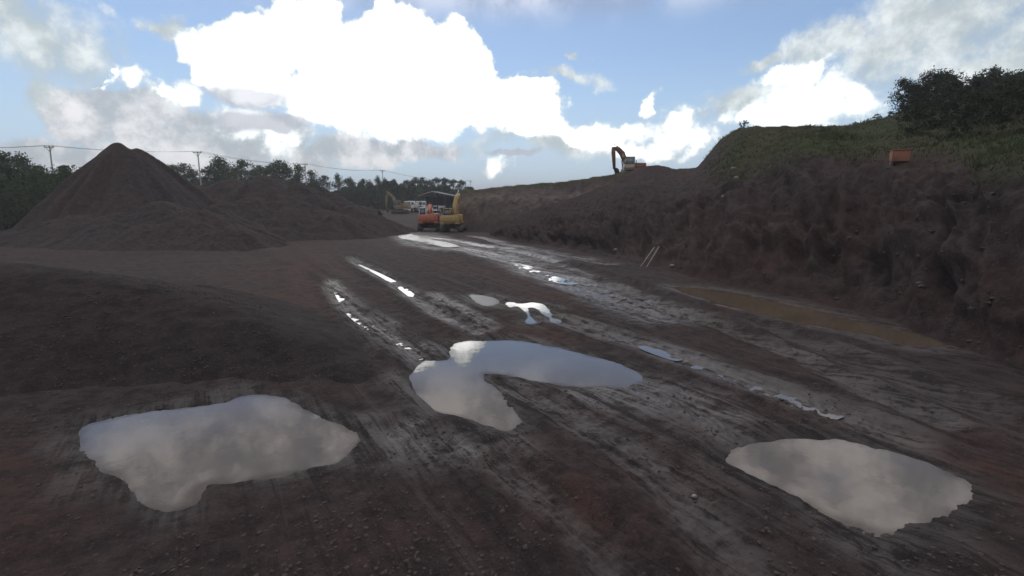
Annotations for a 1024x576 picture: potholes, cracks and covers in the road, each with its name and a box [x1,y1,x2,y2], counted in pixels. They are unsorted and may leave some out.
pothole [389,333,662,438]
pothole [461,292,506,307]
pothole [48,385,380,525]
pothole [500,298,564,326]
pothole [695,422,1014,549]
